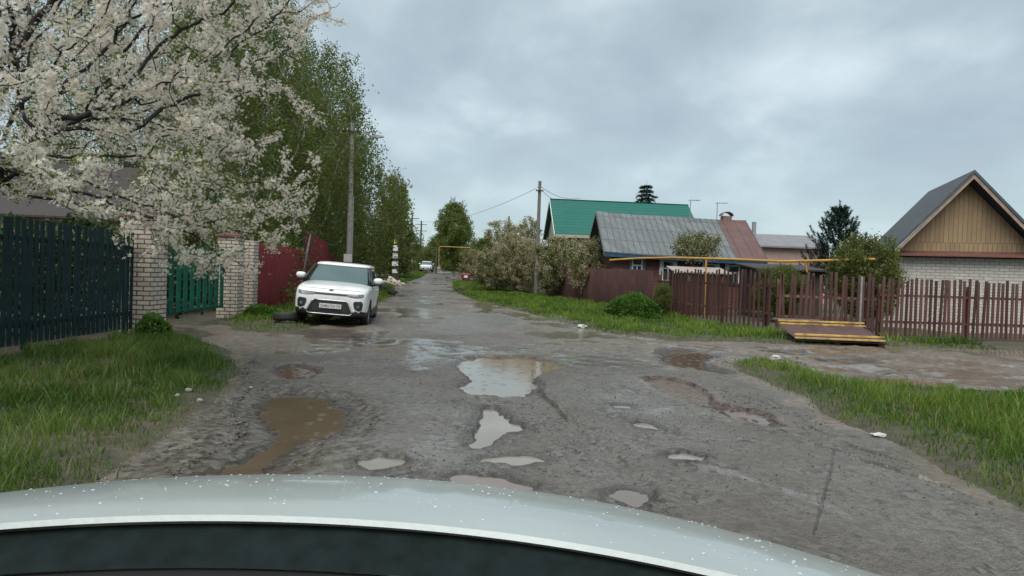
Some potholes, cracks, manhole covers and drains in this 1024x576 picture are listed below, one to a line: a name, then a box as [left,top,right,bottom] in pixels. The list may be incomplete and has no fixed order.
pothole [268,363,325,380]
pothole [602,485,656,508]
pothole [629,419,666,430]
pothole [475,451,551,466]
pothole [166,385,384,477]
pothole [465,405,526,449]
pothole [638,375,787,427]
pothole [449,354,574,397]
pothole [652,347,738,375]
pothole [353,452,410,470]
pothole [663,448,708,461]
